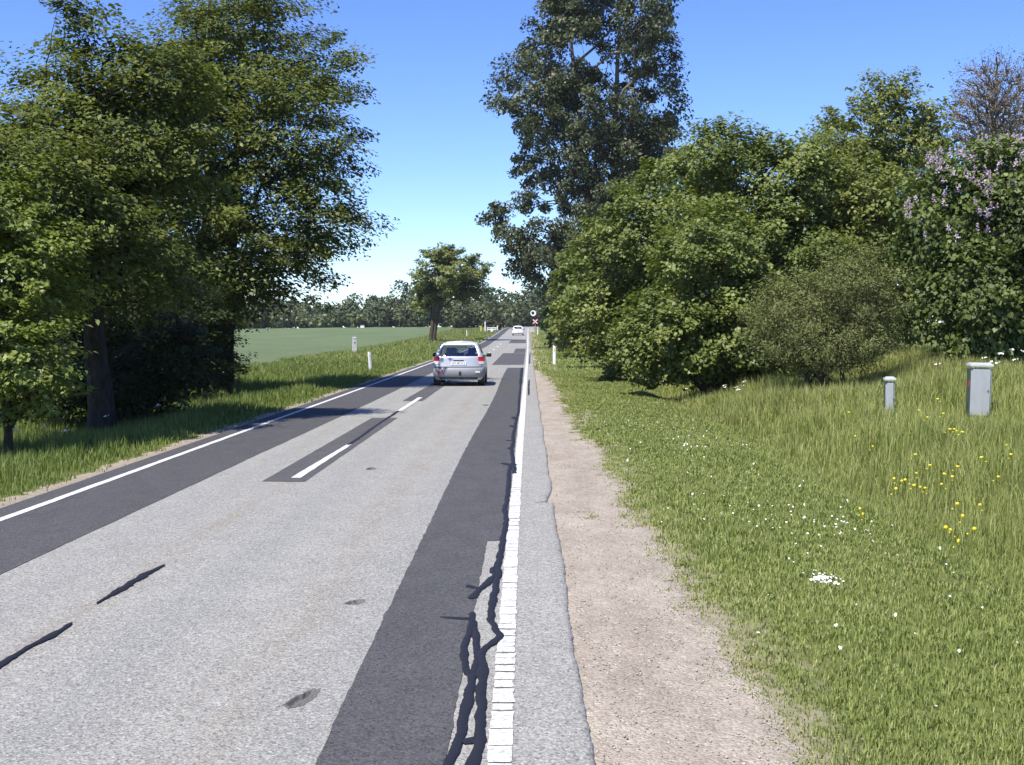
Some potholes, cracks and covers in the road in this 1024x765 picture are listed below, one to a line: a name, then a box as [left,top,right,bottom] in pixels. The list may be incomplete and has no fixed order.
pothole [283,688,321,709]
